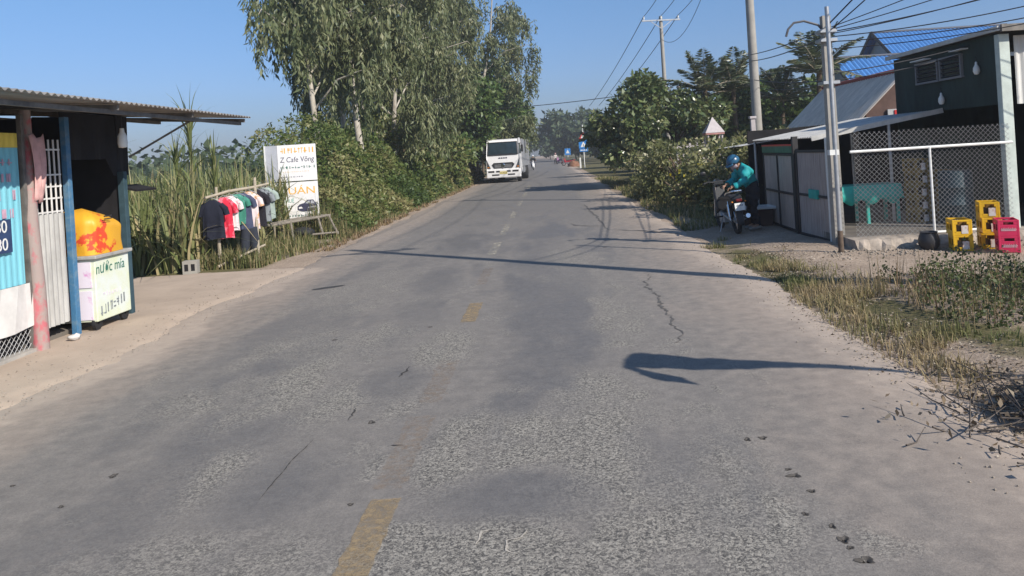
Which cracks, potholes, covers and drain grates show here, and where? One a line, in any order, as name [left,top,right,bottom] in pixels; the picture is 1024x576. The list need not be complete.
crack [643,273,684,343]
